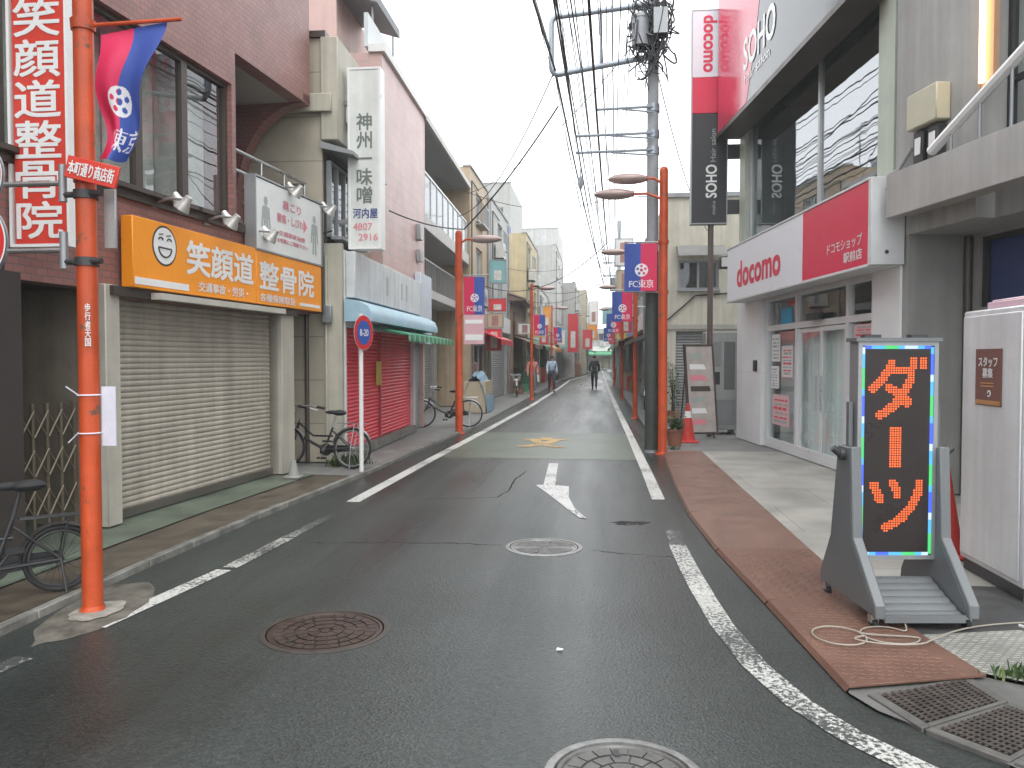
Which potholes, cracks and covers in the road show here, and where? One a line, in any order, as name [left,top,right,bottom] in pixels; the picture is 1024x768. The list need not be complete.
manhole cover [544,738,699,768]
manhole cover [505,538,583,557]
manhole cover [258,610,390,654]
crack [405,471,526,499]
drain grate [867,678,1008,733]
drain grate [926,702,1024,768]
